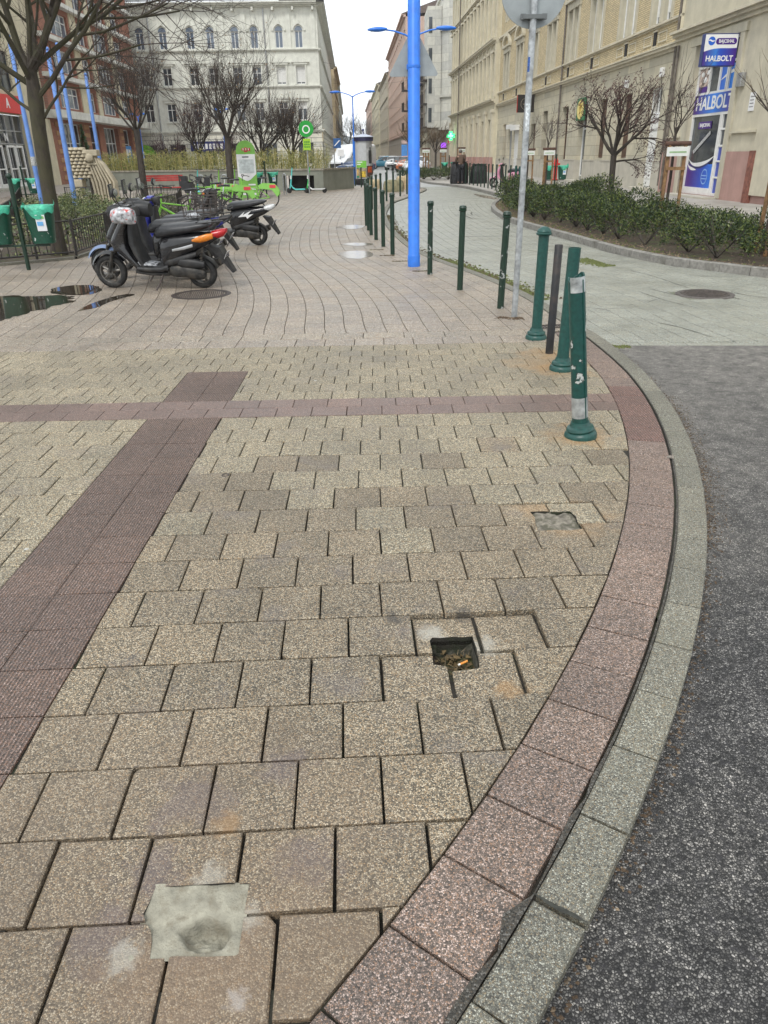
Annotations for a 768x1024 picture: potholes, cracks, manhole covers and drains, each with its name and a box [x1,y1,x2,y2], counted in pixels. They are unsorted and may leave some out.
manhole cover [675,289,735,299]
manhole cover [171,289,231,300]
pothole [431,643,478,676]
